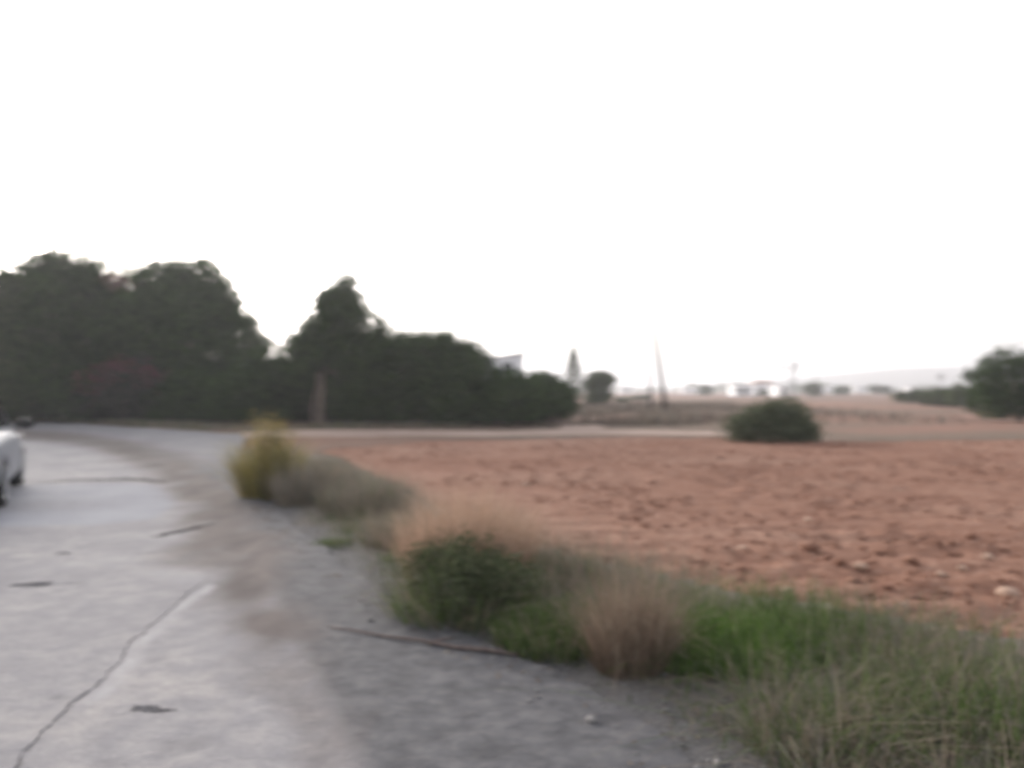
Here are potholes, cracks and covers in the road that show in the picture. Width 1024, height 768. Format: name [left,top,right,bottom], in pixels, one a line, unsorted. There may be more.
pothole [127,705,178,713]
crack [14,579,208,768]
